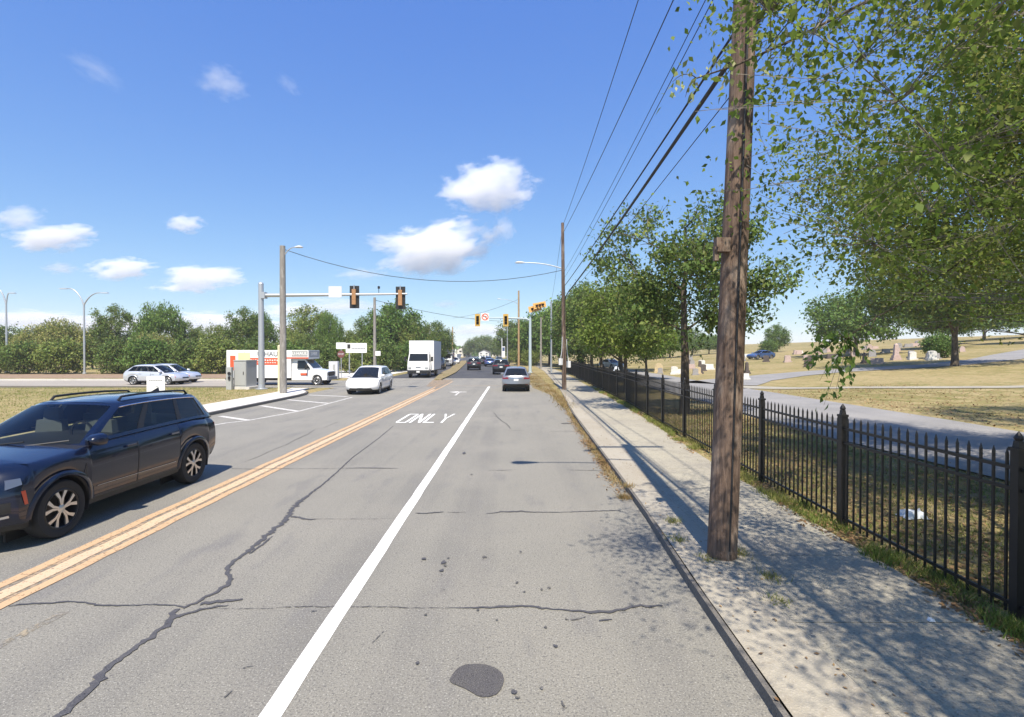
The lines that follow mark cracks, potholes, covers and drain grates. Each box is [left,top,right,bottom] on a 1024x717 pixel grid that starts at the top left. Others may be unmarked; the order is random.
crack [218,604,663,621]
